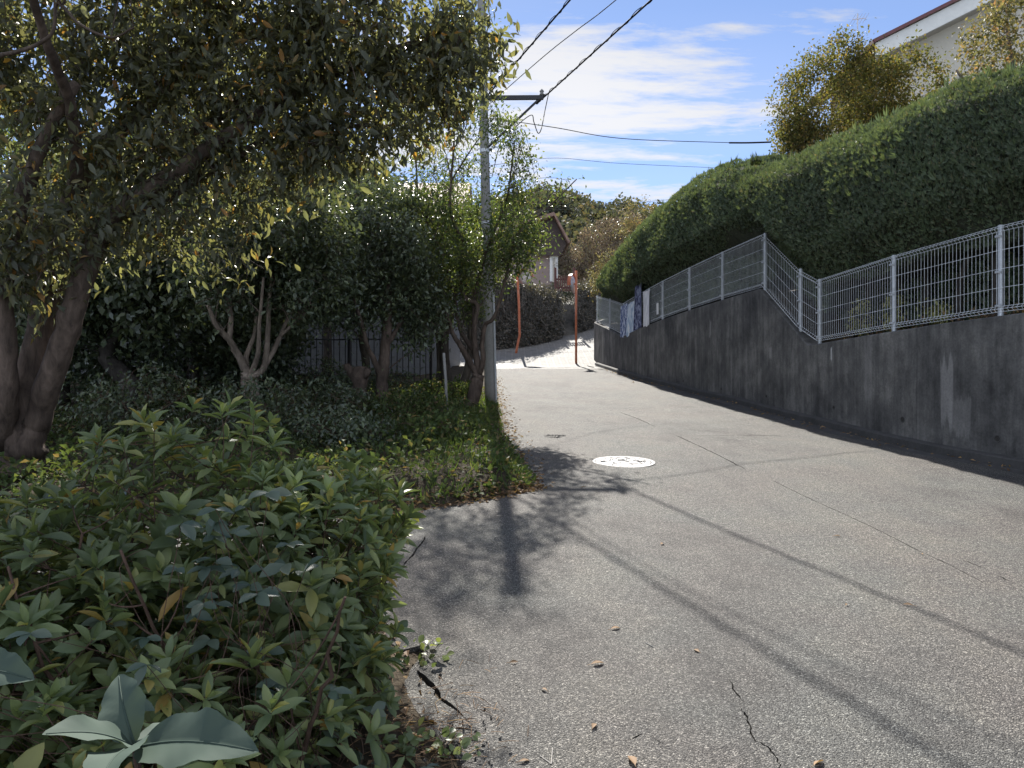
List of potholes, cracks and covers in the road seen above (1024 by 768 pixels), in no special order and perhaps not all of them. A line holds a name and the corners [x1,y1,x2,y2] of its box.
manhole cover [592,456,655,467]
crack [729,679,793,768]
crack [404,536,426,565]
crack [417,670,475,745]
